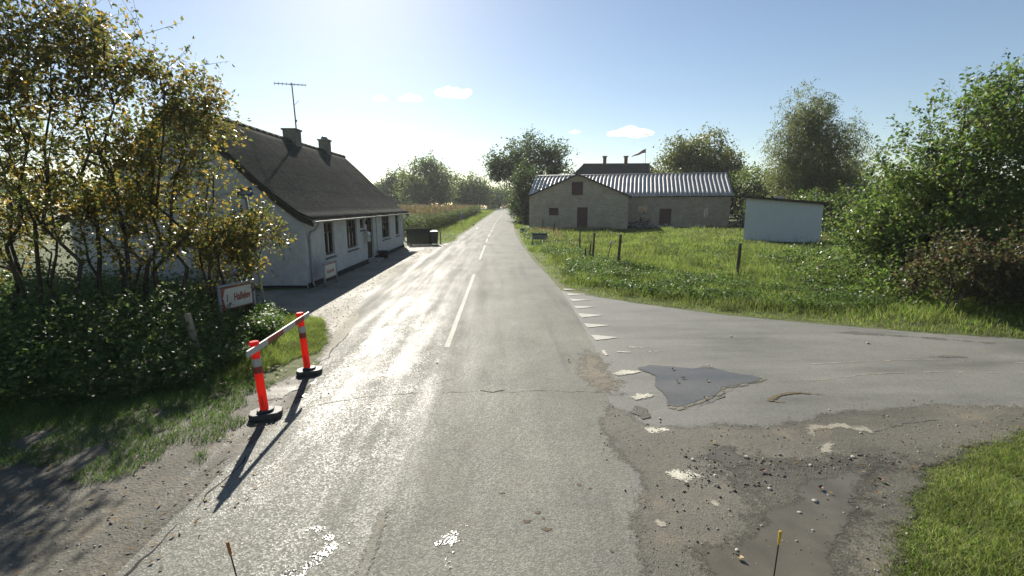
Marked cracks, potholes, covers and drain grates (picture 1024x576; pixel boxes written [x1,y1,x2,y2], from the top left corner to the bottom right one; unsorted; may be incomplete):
pothole [704,446,752,469]
crack [124,528,173,576]
